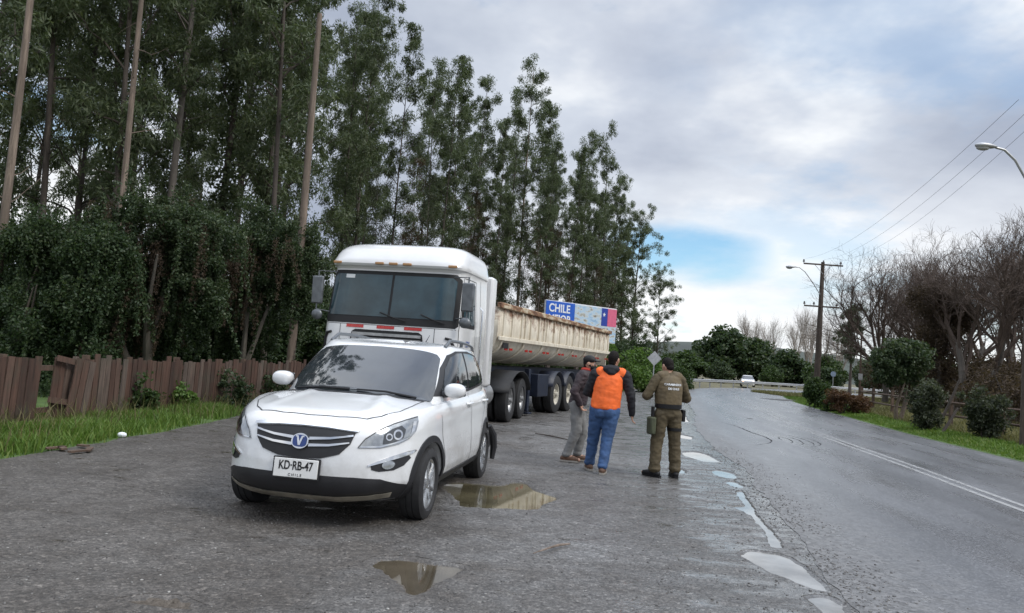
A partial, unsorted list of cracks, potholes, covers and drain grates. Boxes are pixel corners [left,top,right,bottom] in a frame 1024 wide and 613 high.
crack [722,420,821,447]
pothole [437,479,565,510]
pothole [359,555,475,600]
